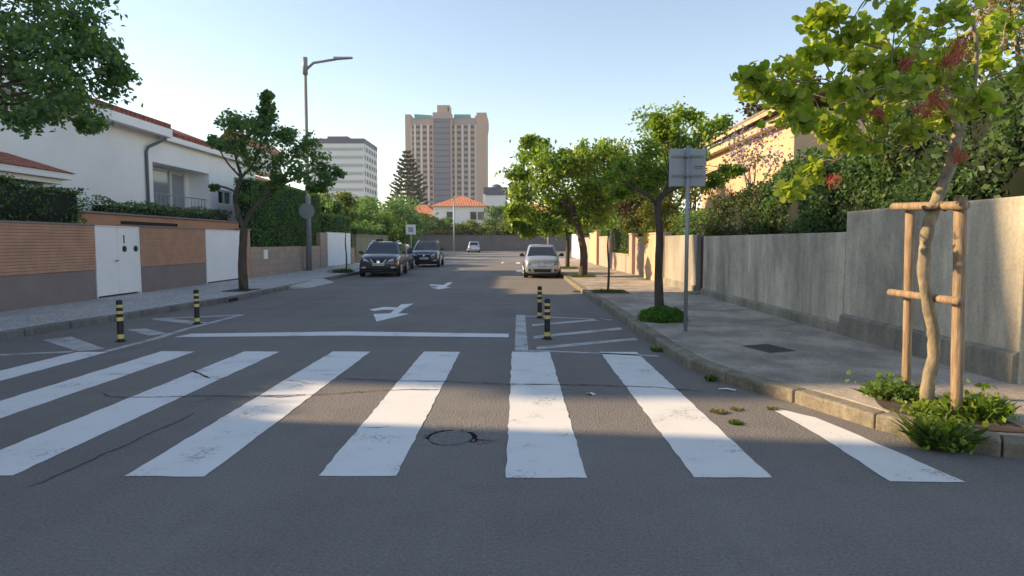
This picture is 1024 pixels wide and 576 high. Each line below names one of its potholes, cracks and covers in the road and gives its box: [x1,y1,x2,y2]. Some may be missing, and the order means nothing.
manhole cover [422,428,491,446]
crack [102,378,698,403]
manhole cover [743,344,796,353]
